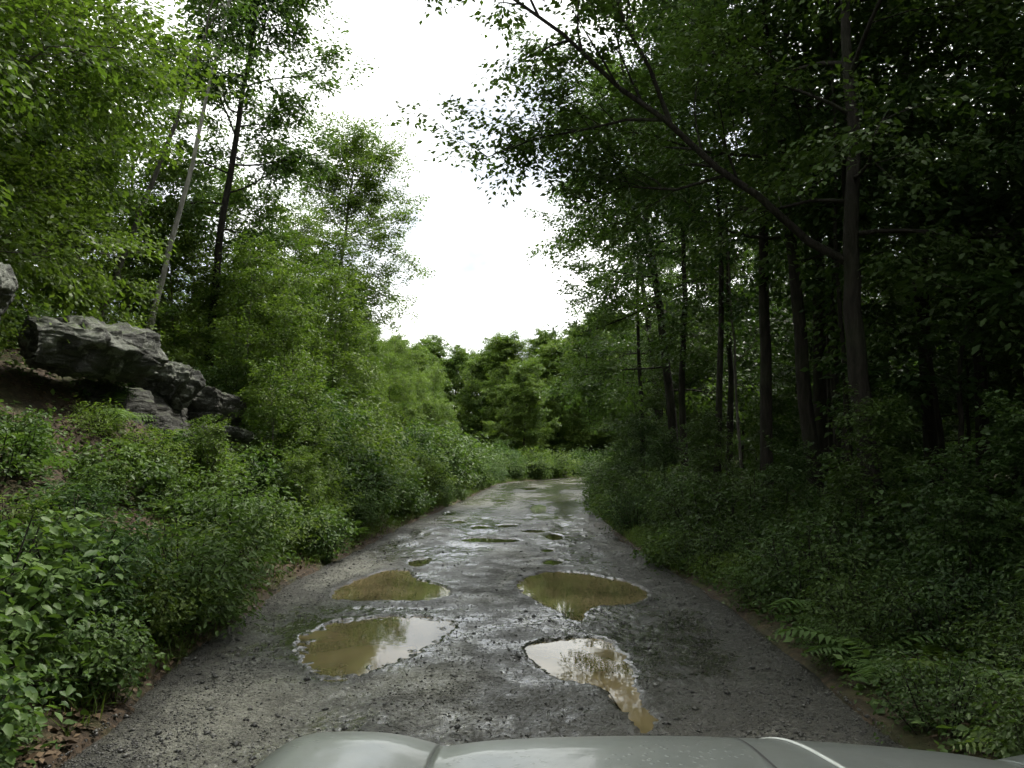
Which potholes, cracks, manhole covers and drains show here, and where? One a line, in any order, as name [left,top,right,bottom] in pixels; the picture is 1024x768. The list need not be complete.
pothole [511,570,653,621]
pothole [289,613,460,683]
pothole [518,635,664,735]
pothole [527,504,548,514]
pothole [541,558,565,566]
pothole [405,557,434,567]
pothole [327,568,455,601]
